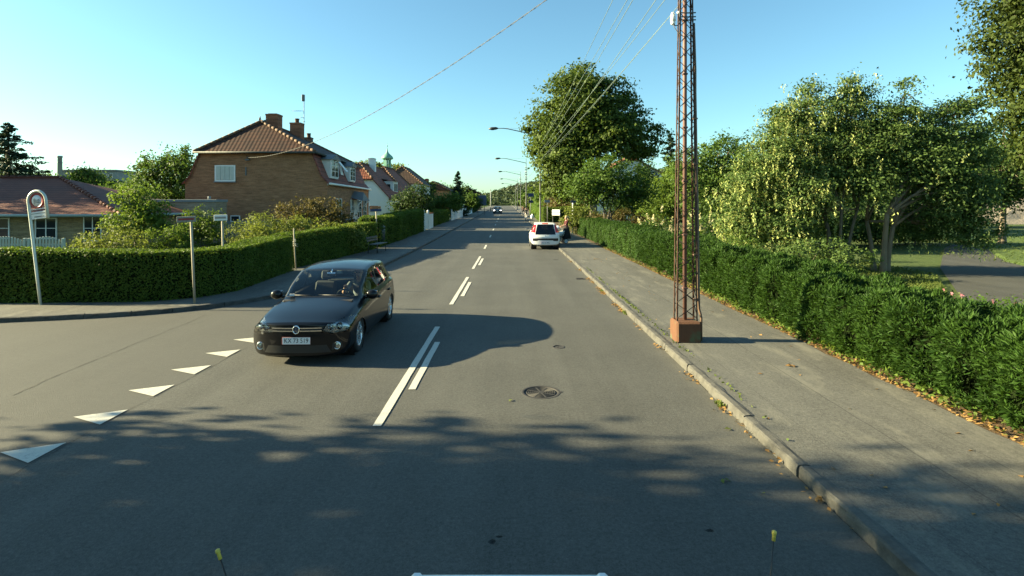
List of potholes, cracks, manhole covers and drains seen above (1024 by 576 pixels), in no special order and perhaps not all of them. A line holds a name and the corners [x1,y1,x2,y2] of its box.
manhole cover [521,386,562,399]
